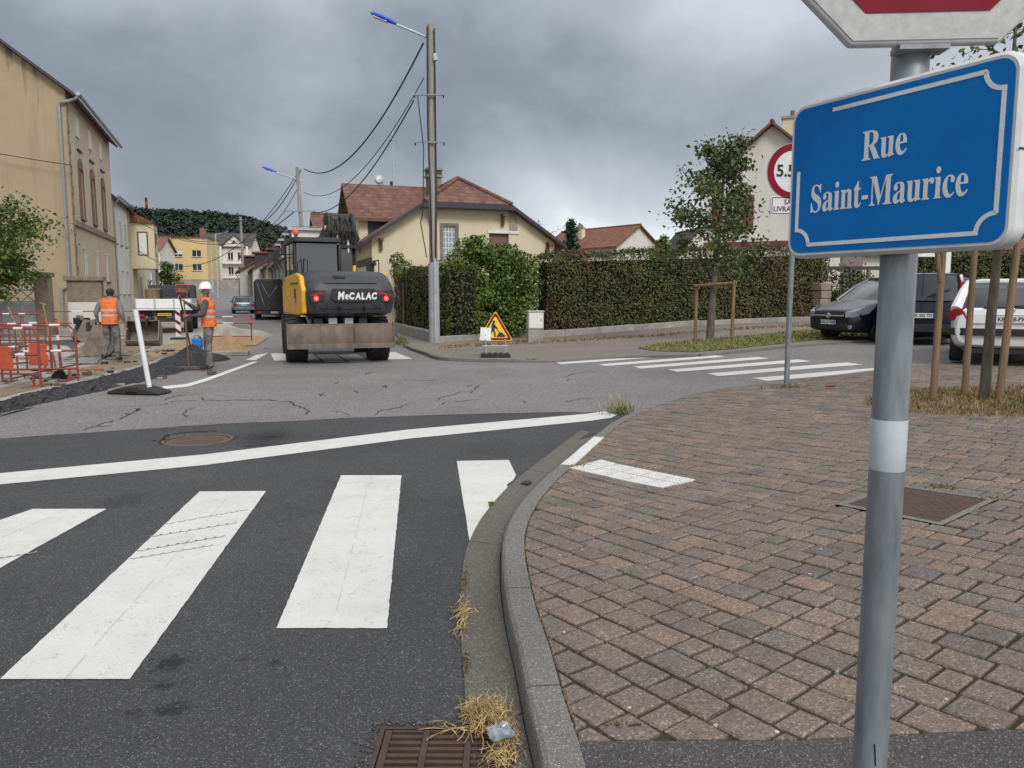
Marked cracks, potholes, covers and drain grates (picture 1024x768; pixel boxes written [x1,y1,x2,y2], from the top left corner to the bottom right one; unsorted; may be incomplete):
manhole cover [837,485,997,525]
manhole cover [156,432,238,446]
drain grate [368,726,514,768]
crack [84,372,526,441]
